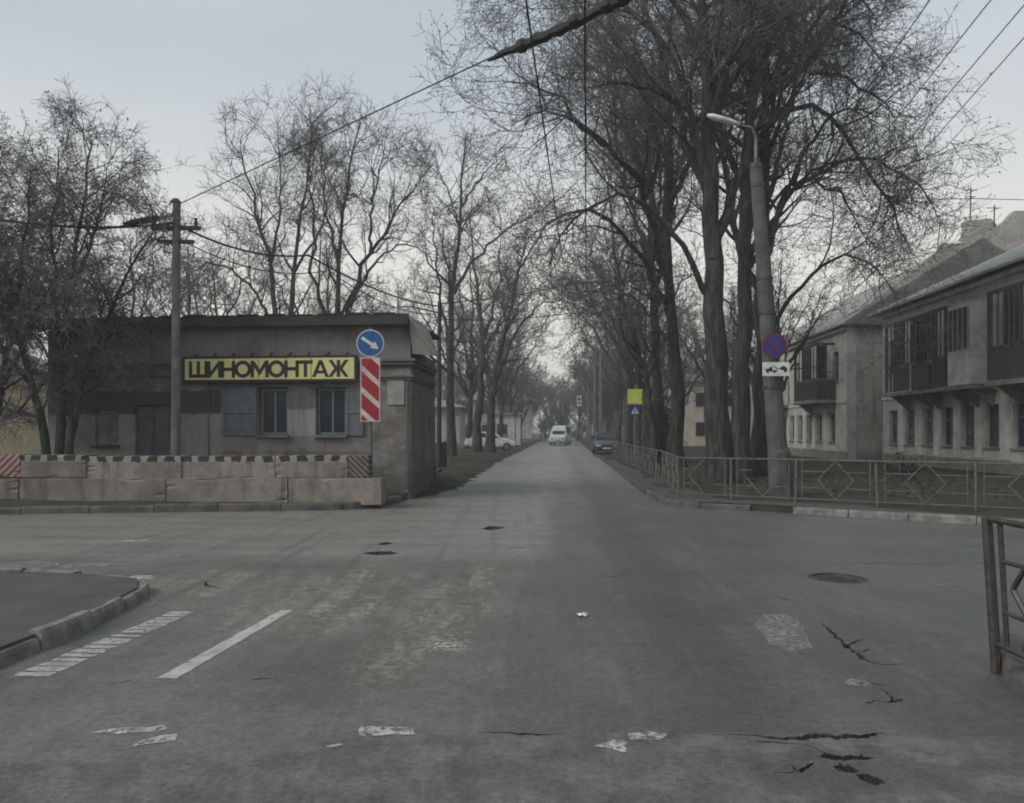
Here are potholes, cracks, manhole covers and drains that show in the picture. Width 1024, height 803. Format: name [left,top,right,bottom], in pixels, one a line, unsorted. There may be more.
crack [823,624,895,665]
crack [860,682,903,703]
crack [714,733,883,773]
manhole cover [807,573,869,584]
